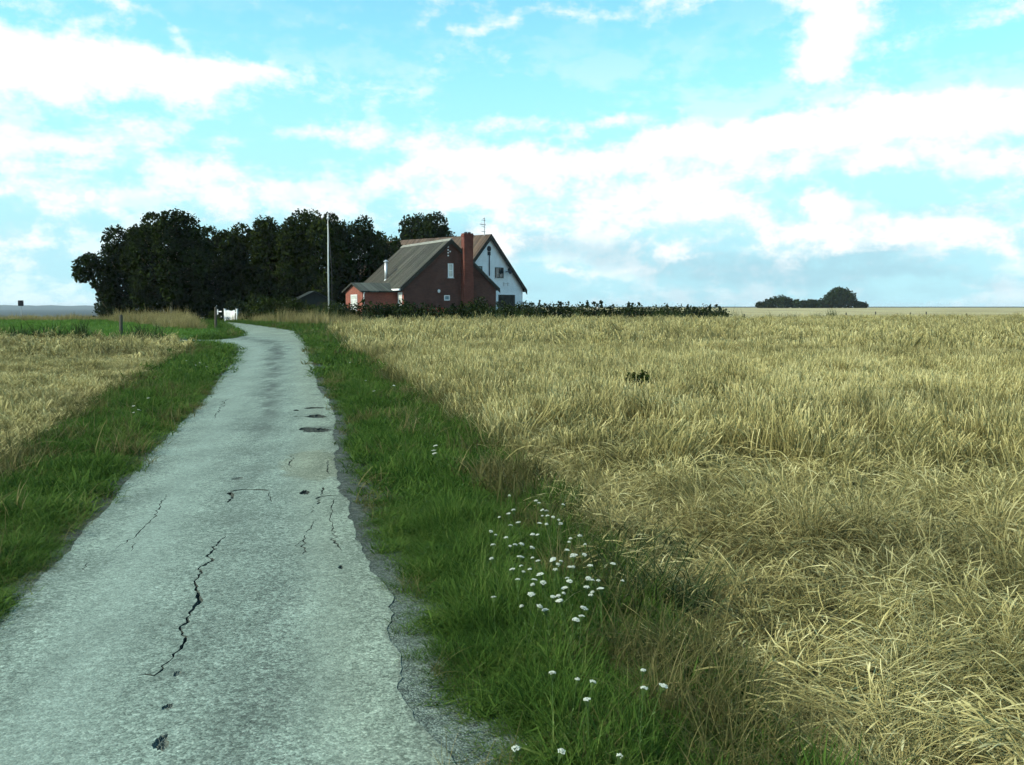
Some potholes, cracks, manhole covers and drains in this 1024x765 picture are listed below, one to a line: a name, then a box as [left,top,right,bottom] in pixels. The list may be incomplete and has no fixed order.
crack [295,461,341,554]
crack [227,489,272,503]
pothole [152,734,169,751]
crack [82,499,226,676]
